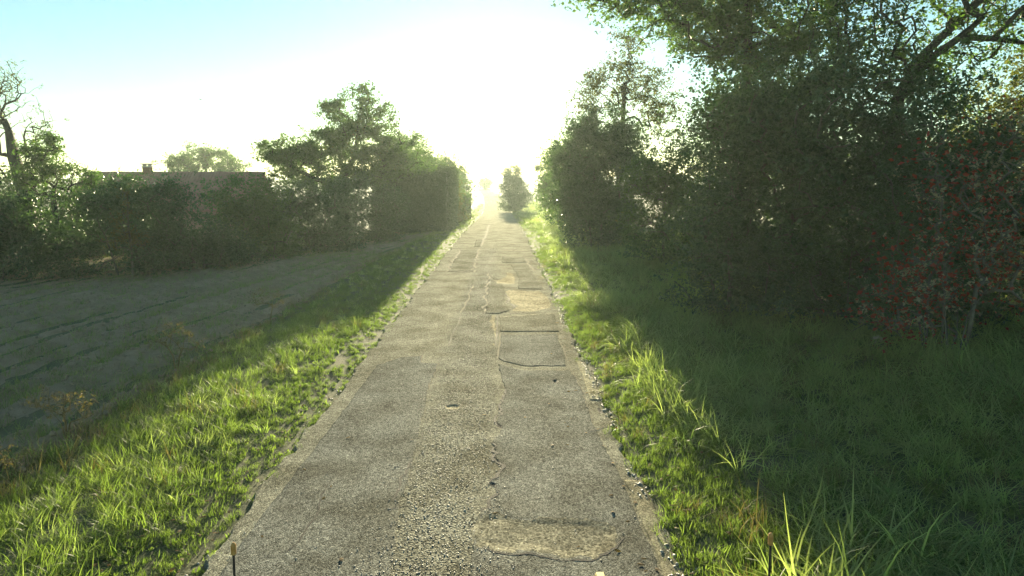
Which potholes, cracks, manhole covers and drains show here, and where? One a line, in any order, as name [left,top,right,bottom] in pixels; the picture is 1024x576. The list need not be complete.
crack [481,389,506,512]
crack [447,225,546,369]
